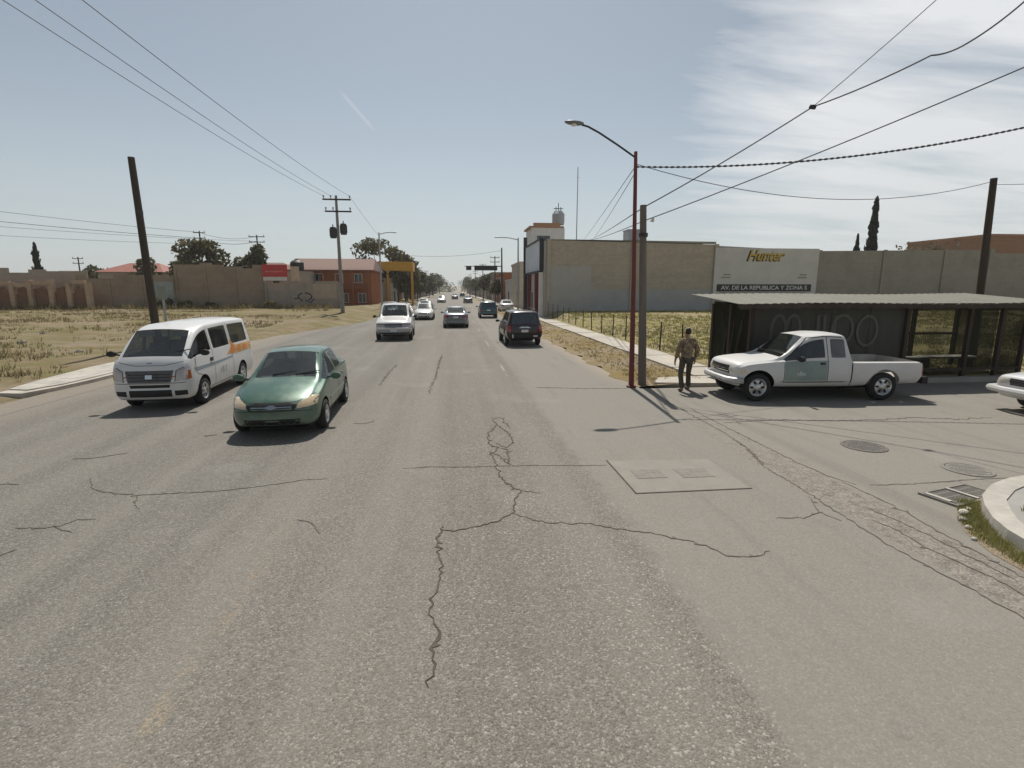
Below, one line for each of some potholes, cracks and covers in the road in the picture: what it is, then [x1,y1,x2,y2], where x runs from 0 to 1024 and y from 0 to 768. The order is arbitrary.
crack [425,417,767,688]
manhole cover [940,462,996,477]
manhole cover [840,440,889,453]
drain grate [918,483,986,507]
crack [90,478,314,509]
manhole cover [606,459,752,494]
crack [20,519,91,532]
crack [661,398,1024,618]
